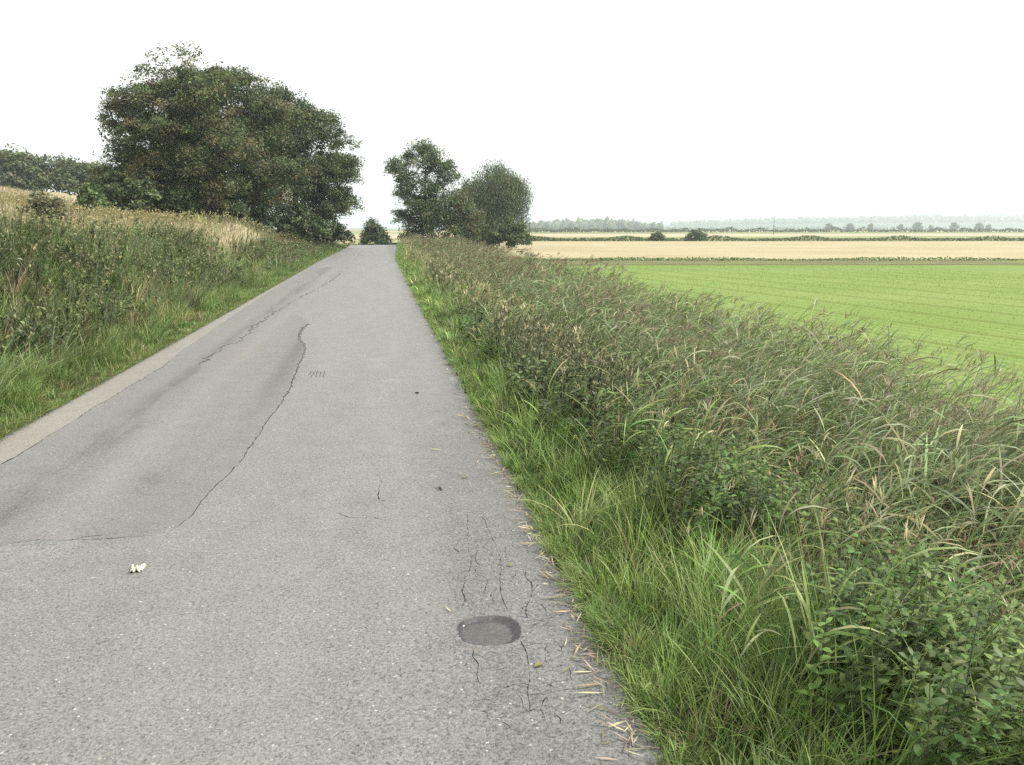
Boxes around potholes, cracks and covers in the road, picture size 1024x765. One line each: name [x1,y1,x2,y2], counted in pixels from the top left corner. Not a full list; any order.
crack [177,273,342,527]
crack [439,511,572,732]
crack [7,535,139,545]
